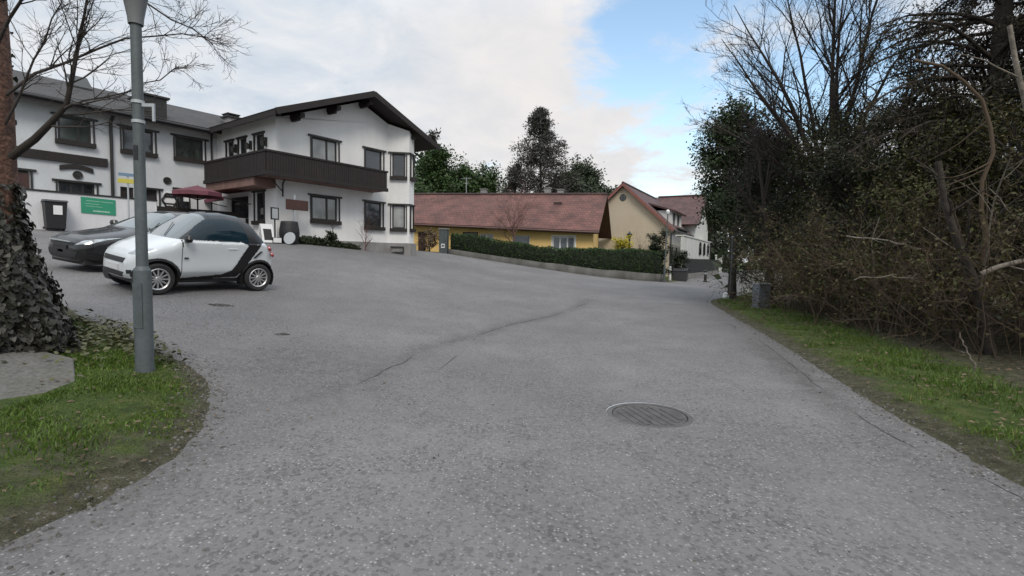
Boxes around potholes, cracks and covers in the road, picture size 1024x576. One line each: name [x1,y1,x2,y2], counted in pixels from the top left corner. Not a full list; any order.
manhole cover [606,403,694,428]
crack [852,411,931,455]
